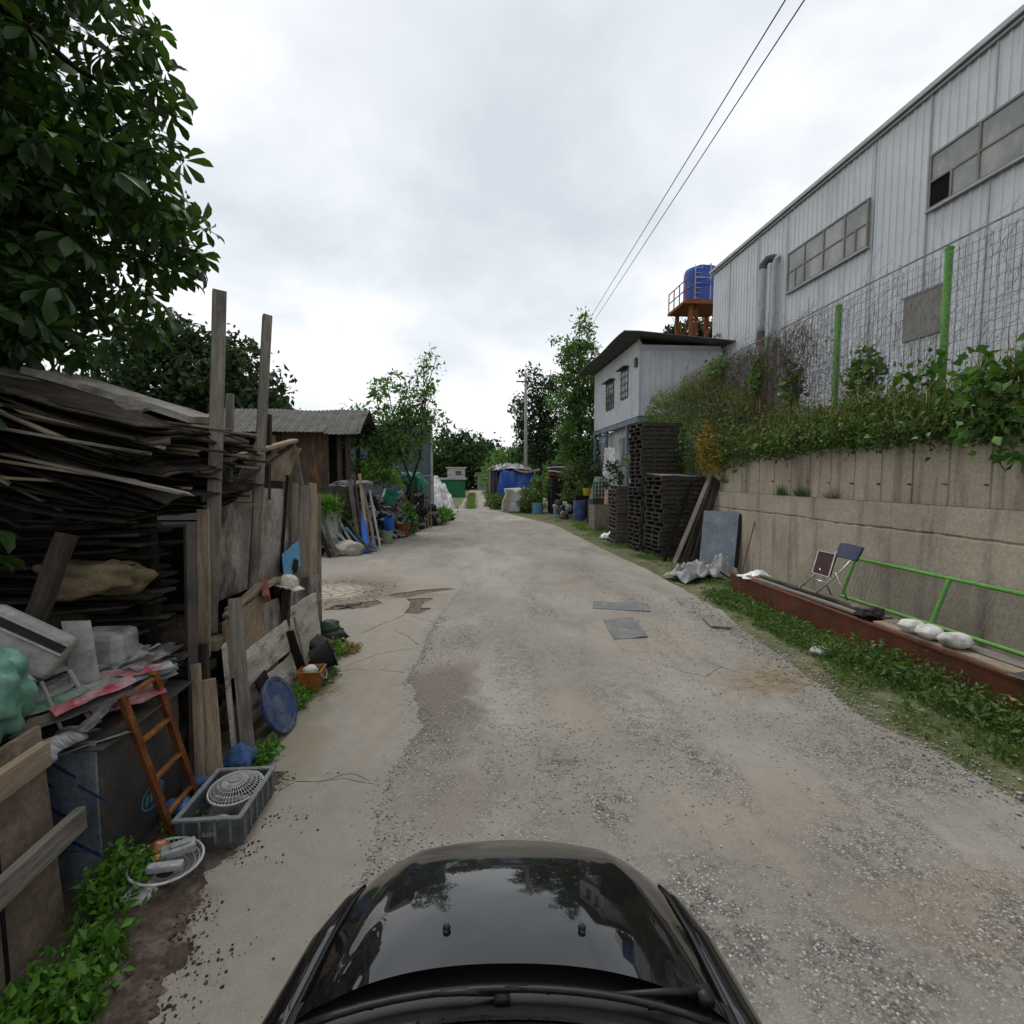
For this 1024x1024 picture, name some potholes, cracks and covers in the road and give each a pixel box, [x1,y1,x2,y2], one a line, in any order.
crack [281,773,373,784]
crack [323,575,438,673]
